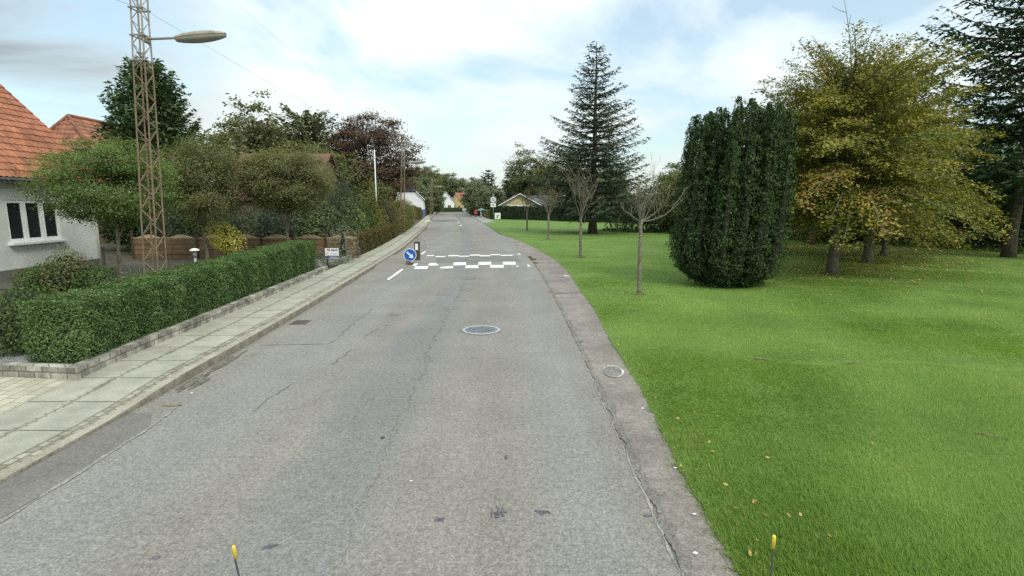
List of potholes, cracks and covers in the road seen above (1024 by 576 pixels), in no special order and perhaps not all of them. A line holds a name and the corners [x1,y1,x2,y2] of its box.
crack [328,309,386,364]
manhole cover [603,365,624,377]
manhole cover [459,325,501,335]
